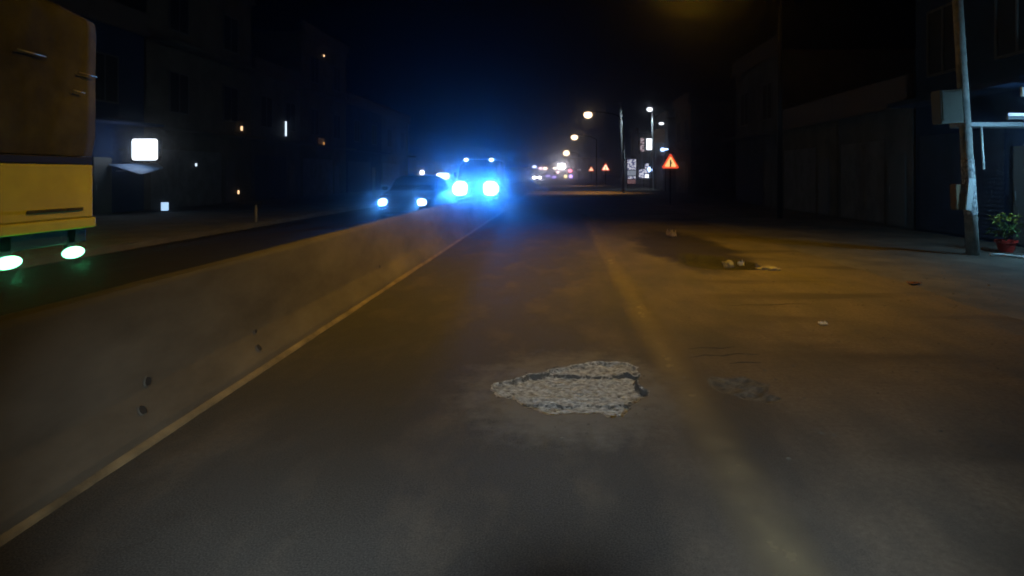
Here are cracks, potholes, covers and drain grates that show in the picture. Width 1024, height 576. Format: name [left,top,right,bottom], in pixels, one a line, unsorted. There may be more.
crack [689,346,761,364]
pothole [490,361,650,418]
